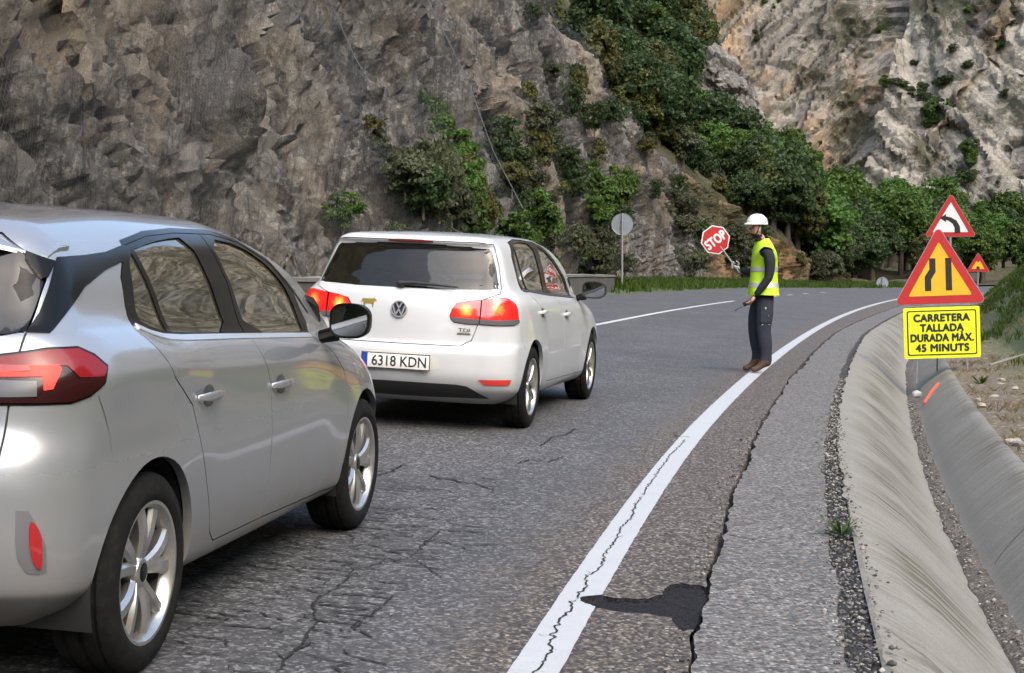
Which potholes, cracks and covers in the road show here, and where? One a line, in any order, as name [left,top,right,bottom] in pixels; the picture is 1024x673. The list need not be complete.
crack [690,354,813,673]
crack [532,440,685,673]
crack [0,470,541,673]
crack [519,429,574,463]
pothole [580,583,710,633]
